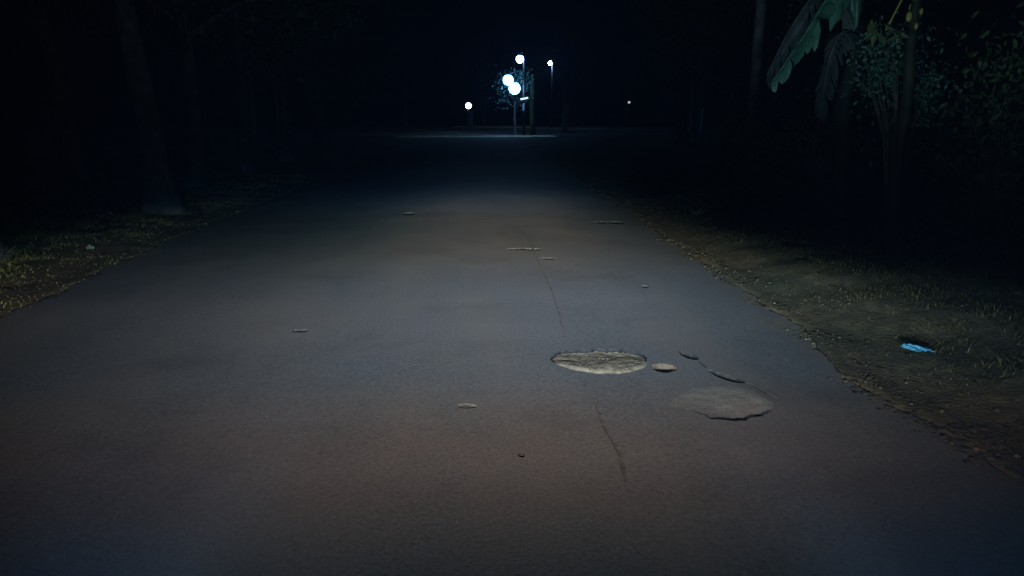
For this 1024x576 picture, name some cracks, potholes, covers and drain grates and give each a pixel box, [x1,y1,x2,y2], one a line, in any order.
pothole [652,364,677,373]
crack [525,231,565,341]
crack [595,403,626,482]
crack [748,383,780,400]
pothole [550,348,647,374]
